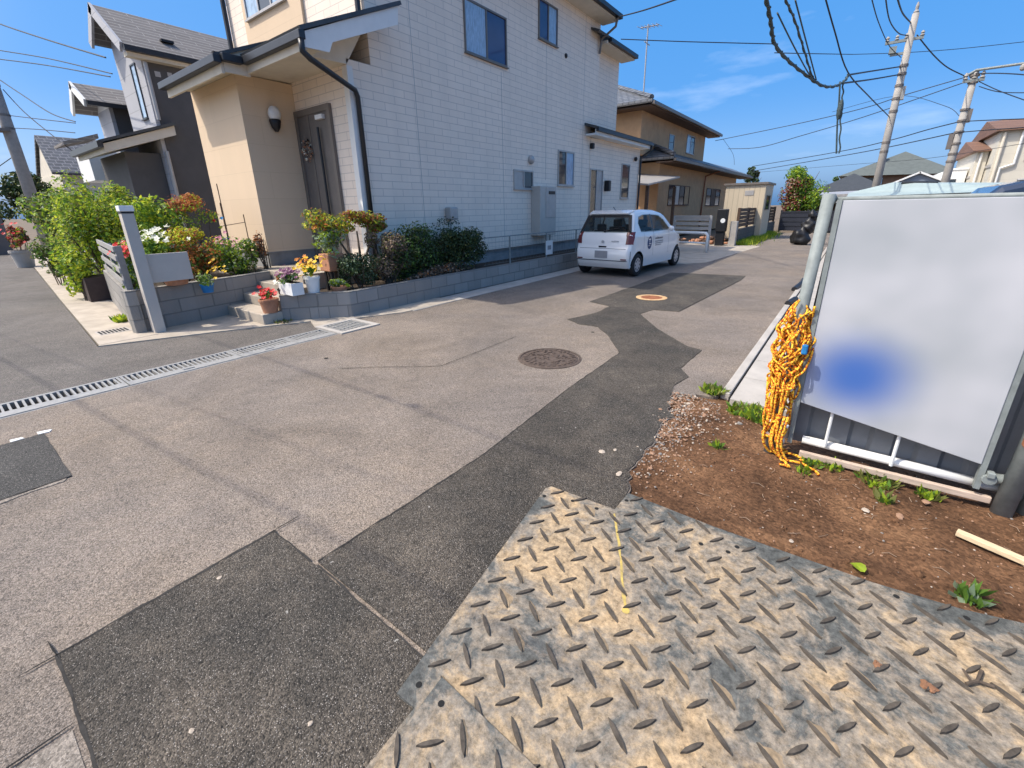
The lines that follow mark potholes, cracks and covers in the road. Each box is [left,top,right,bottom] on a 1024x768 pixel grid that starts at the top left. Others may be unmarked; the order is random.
drain grate [284,329,337,344]
manhole cover [518,348,581,369]
drain grate [315,318,380,335]
drain grate [95,327,132,336]
drain grate [229,338,298,357]
drain grate [0,377,129,418]
drain grate [119,351,243,386]
